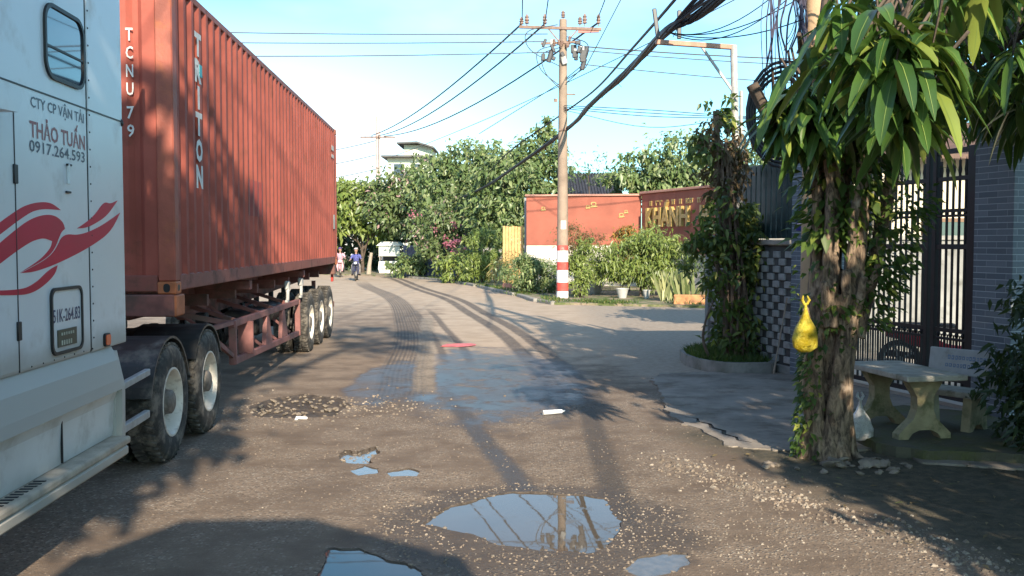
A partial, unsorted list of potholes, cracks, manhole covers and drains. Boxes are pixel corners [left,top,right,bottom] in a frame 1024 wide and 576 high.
pothole [339,445,382,464]
pothole [316,547,424,576]
pothole [249,394,352,418]
pothole [350,465,379,475]
pothole [623,552,690,576]
pothole [387,468,420,476]
pothole [423,491,623,553]
